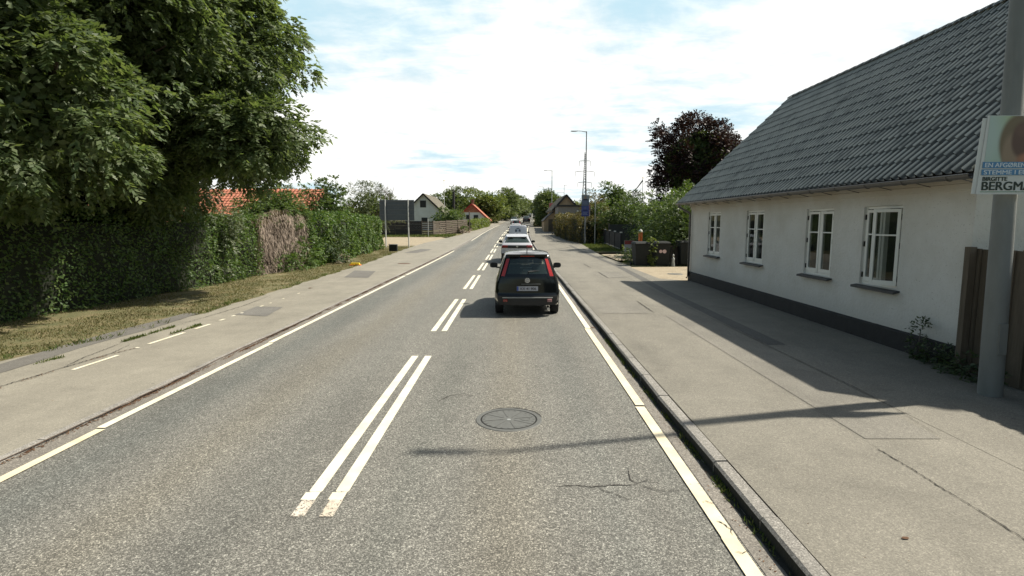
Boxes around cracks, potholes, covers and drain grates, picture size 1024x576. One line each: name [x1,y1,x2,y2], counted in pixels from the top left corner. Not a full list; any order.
manhole cover [476,408,542,432]
crack [556,470,682,500]
